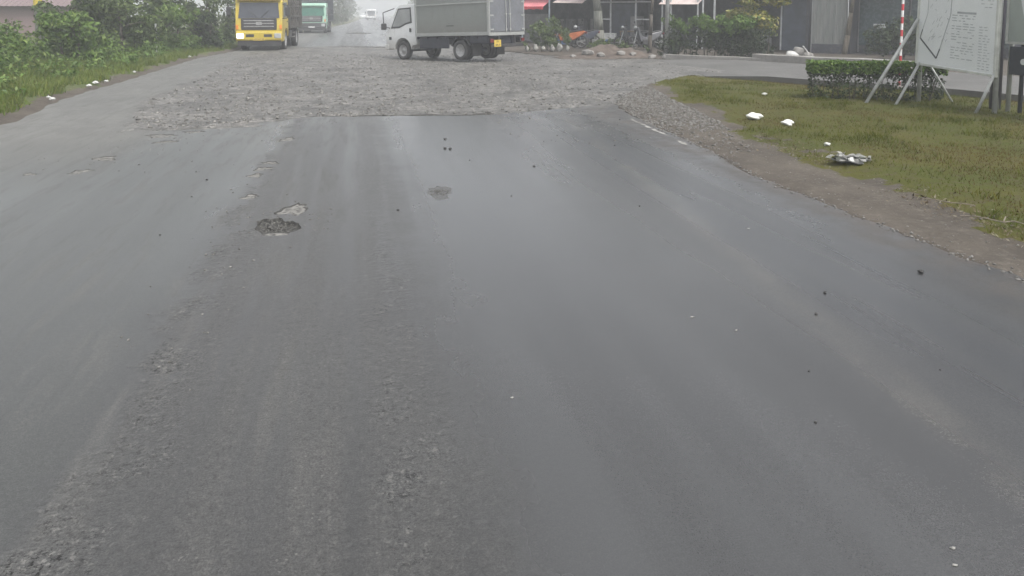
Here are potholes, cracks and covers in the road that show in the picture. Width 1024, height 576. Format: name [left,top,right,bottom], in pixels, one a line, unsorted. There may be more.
pothole [427,186,452,200]
pothole [255,218,301,236]
pothole [274,202,308,216]
